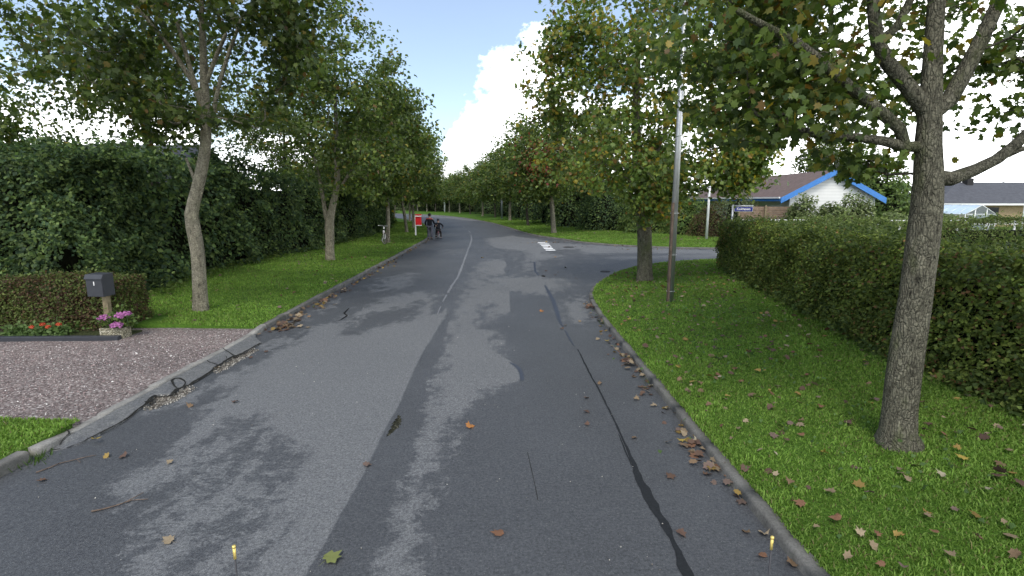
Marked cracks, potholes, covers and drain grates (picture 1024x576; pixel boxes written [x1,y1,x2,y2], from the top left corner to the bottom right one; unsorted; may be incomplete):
pothole [216,349,255,371]
pothole [148,387,192,409]
